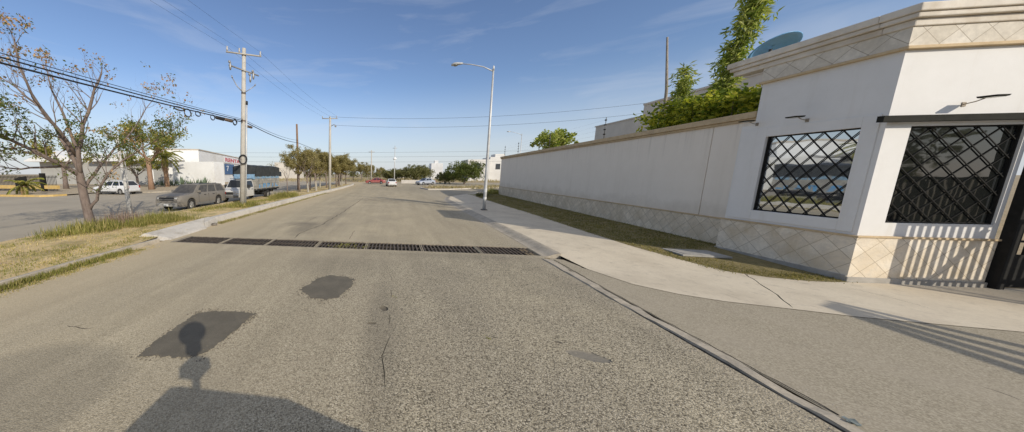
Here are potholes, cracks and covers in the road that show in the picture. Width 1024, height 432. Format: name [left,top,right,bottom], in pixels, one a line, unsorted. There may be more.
drain grate [171,236,540,256]
manhole cover [662,248,733,259]
